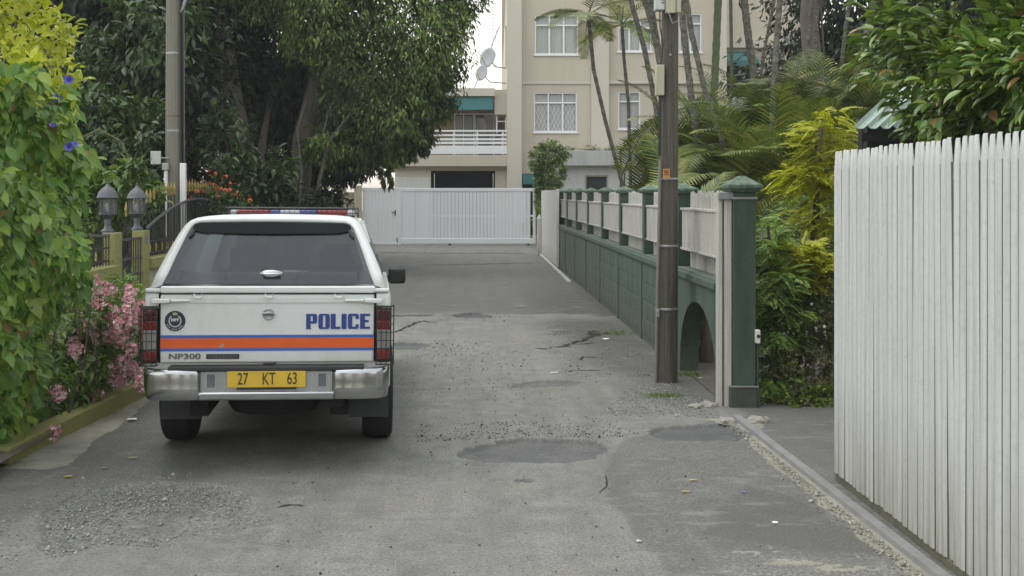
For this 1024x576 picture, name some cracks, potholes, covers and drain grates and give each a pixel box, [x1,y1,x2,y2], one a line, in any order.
crack [392,315,429,332]
crack [539,330,609,371]
